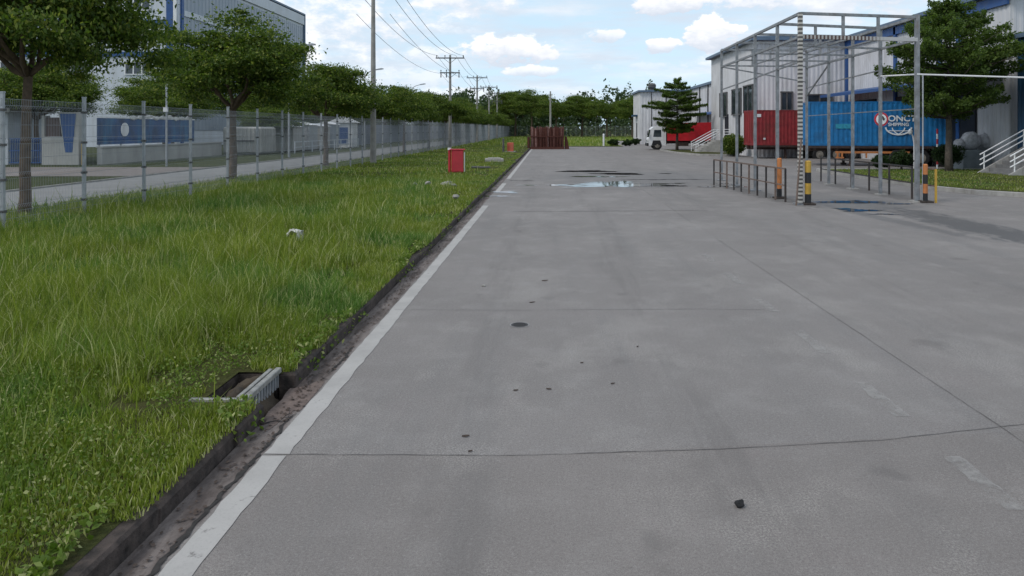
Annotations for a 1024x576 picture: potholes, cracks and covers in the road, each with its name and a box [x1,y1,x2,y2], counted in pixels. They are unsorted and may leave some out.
drain grate [189,367,324,430]
